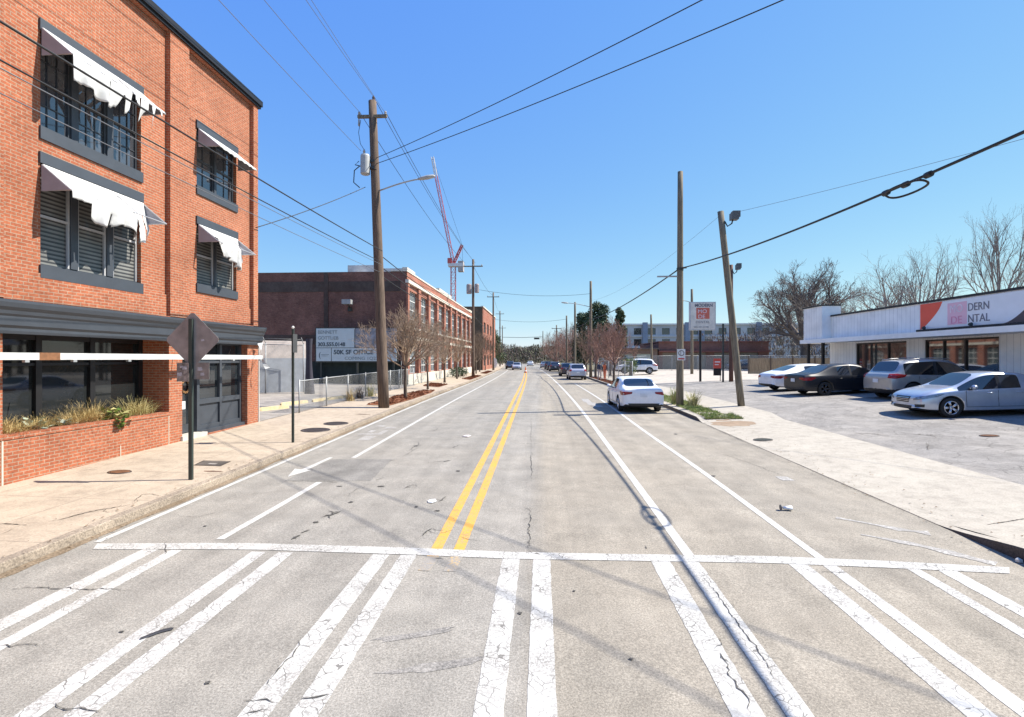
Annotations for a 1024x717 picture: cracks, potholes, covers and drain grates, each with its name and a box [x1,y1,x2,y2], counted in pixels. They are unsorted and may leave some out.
crack [701,571,795,715]
crack [253,481,355,539]
